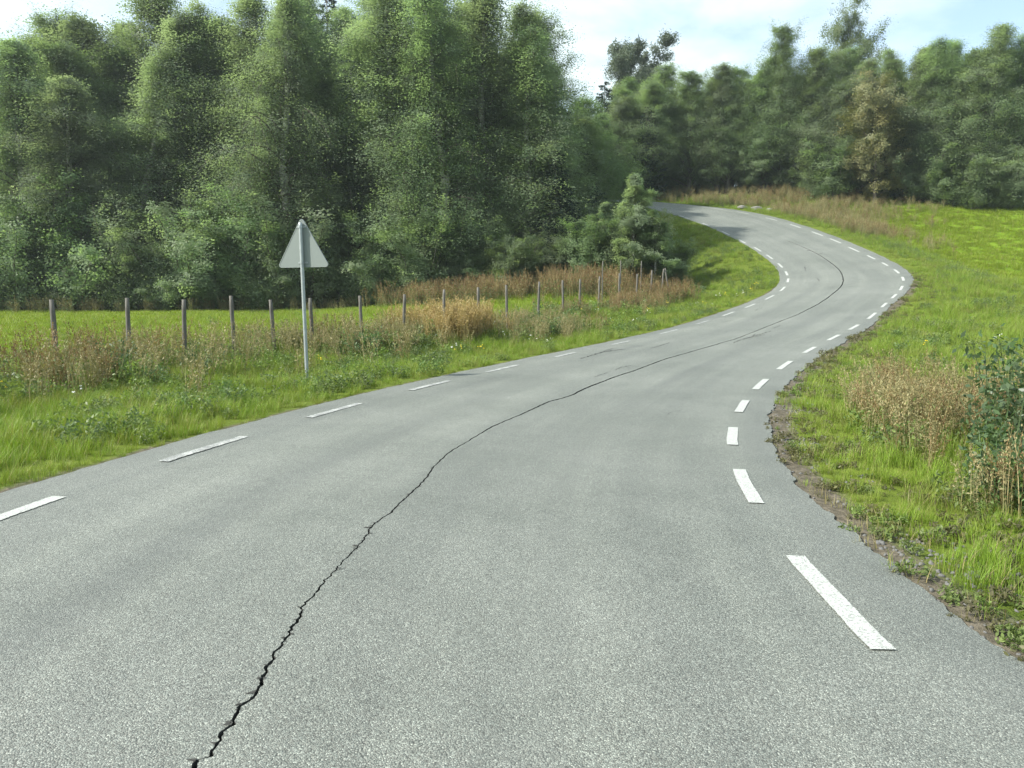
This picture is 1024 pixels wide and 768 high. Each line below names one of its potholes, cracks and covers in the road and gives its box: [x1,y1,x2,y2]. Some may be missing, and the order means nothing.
crack [186,241,844,768]
